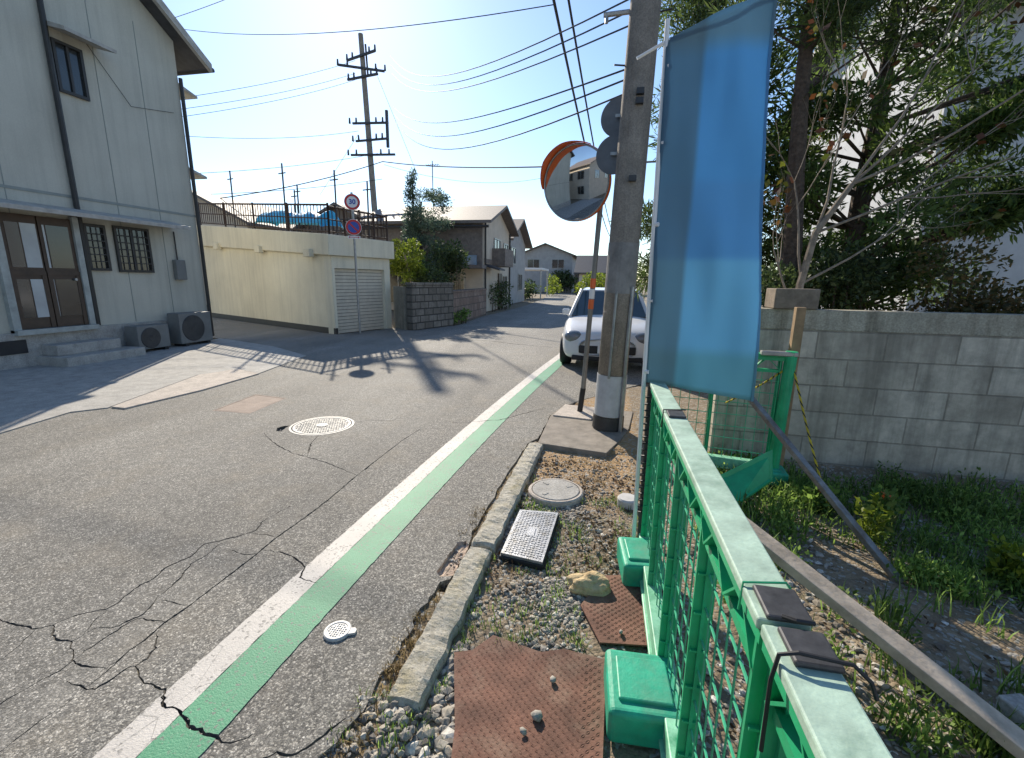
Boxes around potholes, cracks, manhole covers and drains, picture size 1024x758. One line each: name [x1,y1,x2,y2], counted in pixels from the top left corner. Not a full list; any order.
manhole cover [528,478,583,508]
crack [0,506,345,758]
crack [264,433,356,475]
manhole cover [289,416,354,436]
